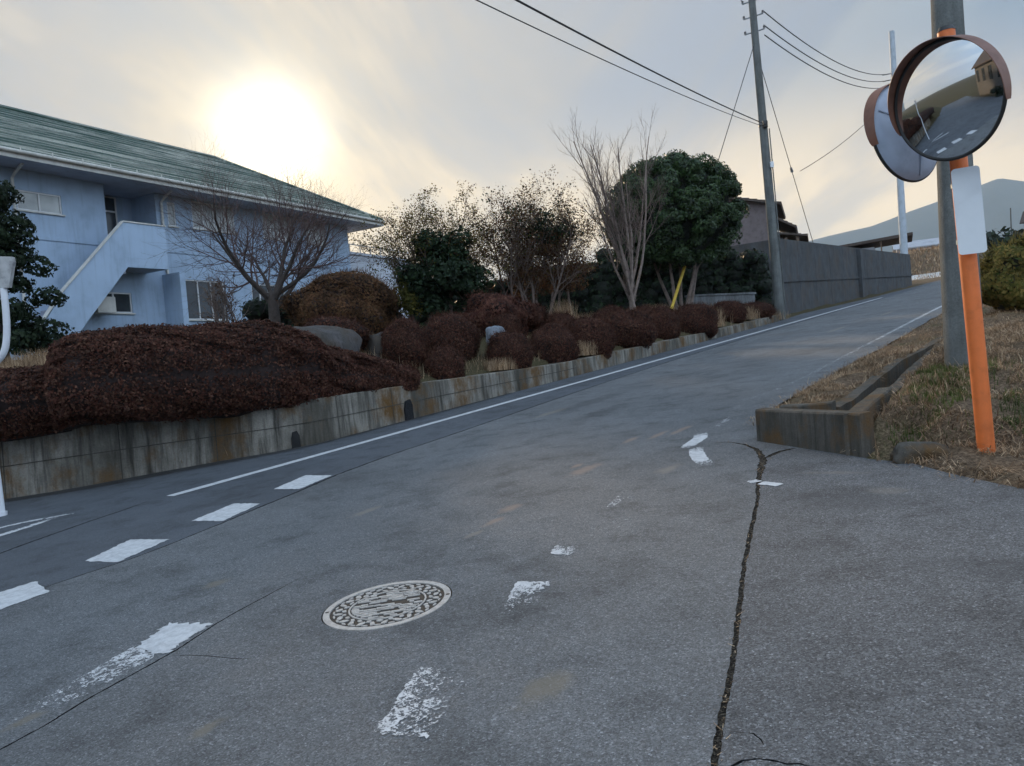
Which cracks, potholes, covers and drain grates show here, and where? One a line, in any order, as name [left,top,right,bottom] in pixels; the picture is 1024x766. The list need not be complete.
crack [707,441,808,766]
manhole cover [323,580,451,631]
